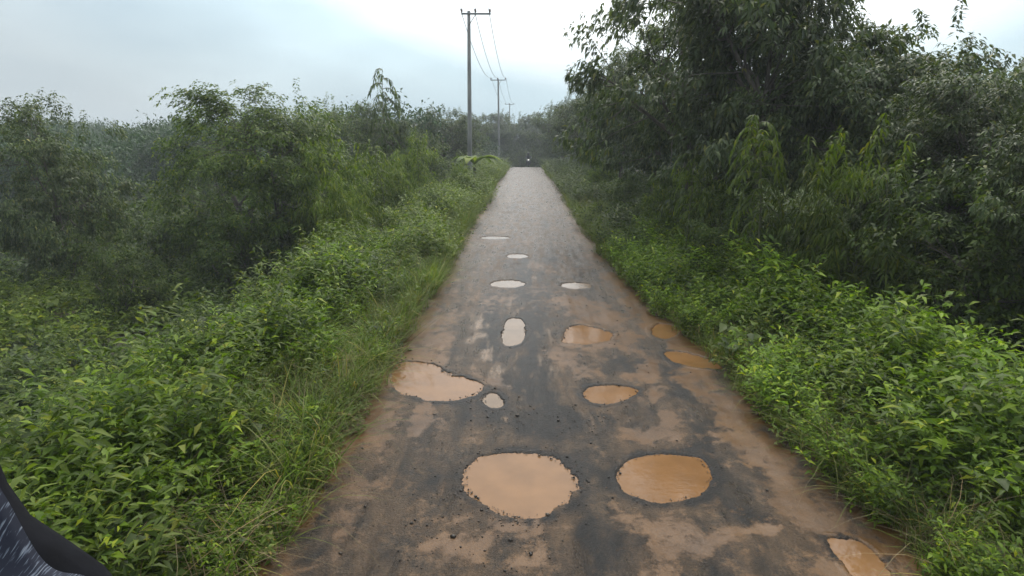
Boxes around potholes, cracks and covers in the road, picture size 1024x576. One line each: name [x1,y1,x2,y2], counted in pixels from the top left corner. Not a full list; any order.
pothole [554,280,599,291]
pothole [643,322,686,341]
pothole [384,359,491,404]
pothole [484,278,533,290]
pothole [475,390,510,411]
pothole [608,450,721,508]
pothole [819,531,902,576]
pothole [495,316,534,348]
pothole [657,349,730,372]
pothole [576,382,646,407]
pothole [453,448,588,524]
pothole [556,323,620,347]
